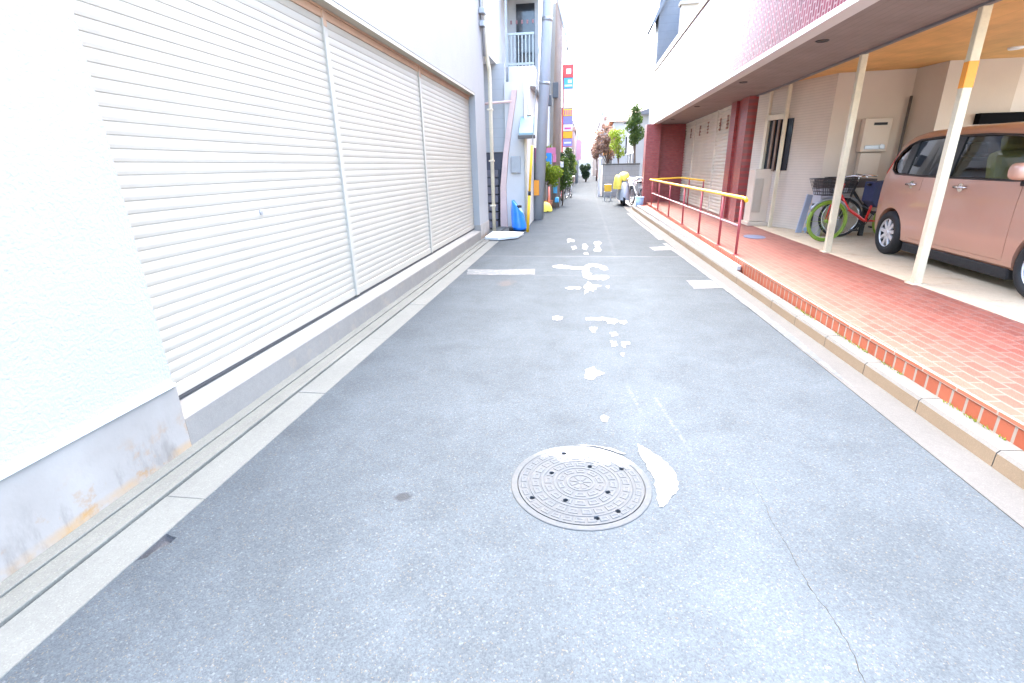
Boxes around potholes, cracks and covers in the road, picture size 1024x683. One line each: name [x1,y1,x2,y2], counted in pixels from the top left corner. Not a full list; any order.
manhole cover [511,446,652,531]
crack [748,473,866,683]
